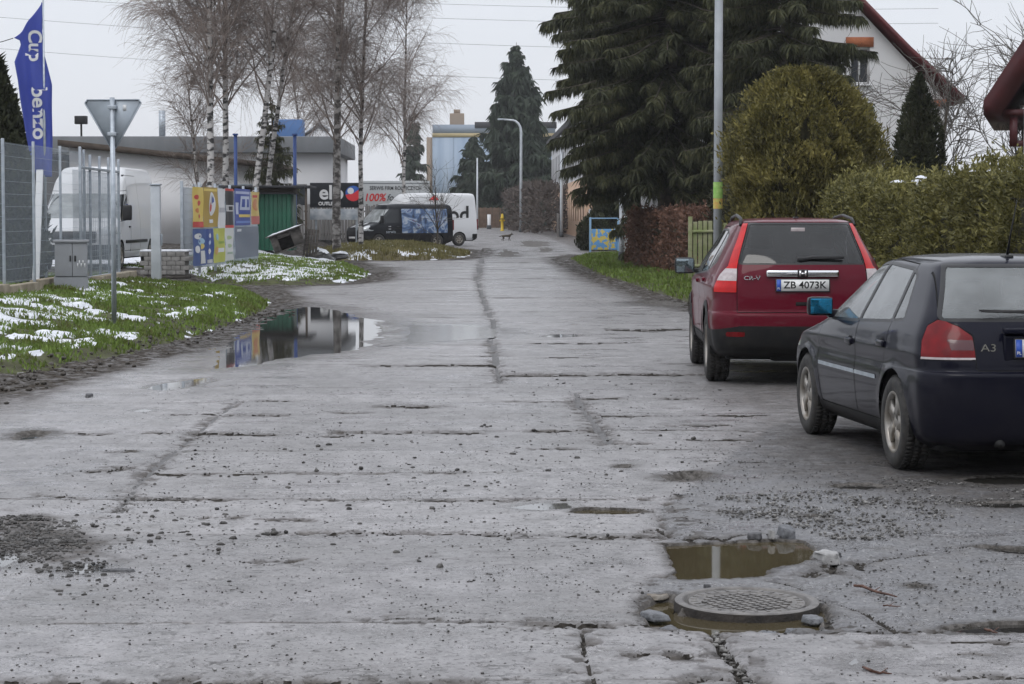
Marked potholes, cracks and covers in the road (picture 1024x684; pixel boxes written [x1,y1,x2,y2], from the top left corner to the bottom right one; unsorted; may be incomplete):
pothole [659,539,818,580]
manhole cover [674,586,820,623]
pothole [956,474,1024,485]
pothole [661,470,713,482]
